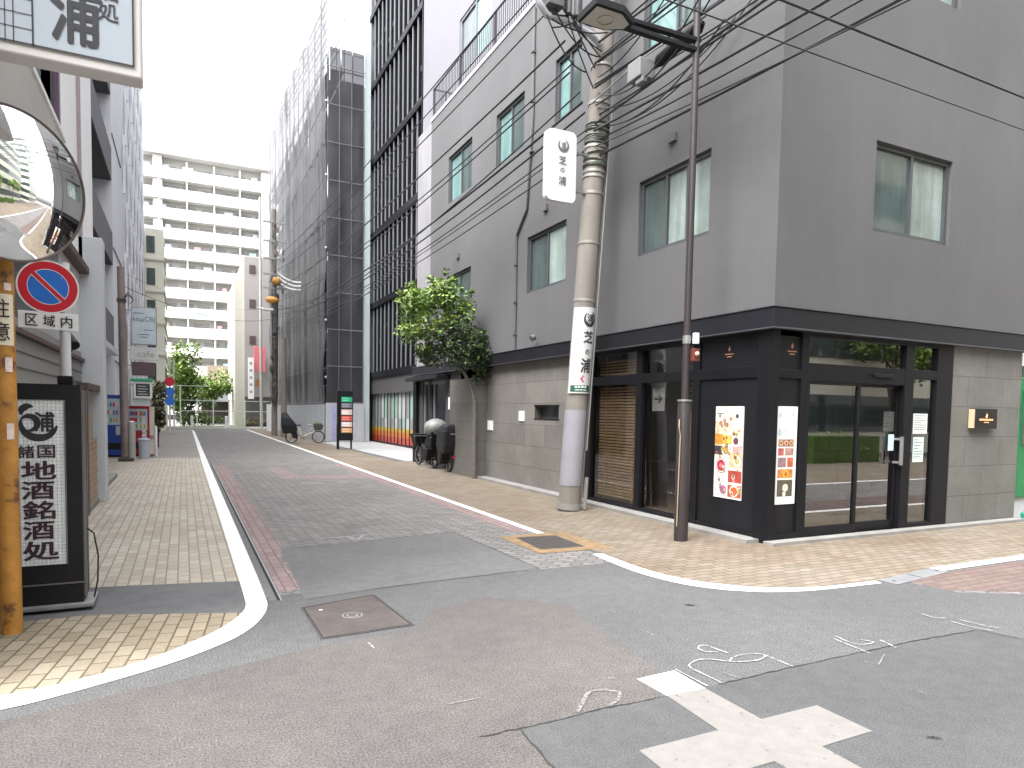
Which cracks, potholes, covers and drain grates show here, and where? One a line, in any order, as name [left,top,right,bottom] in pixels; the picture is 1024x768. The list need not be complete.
crack [479,696,664,768]
manhole cover [500,531,615,554]
manhole cover [301,594,414,639]
